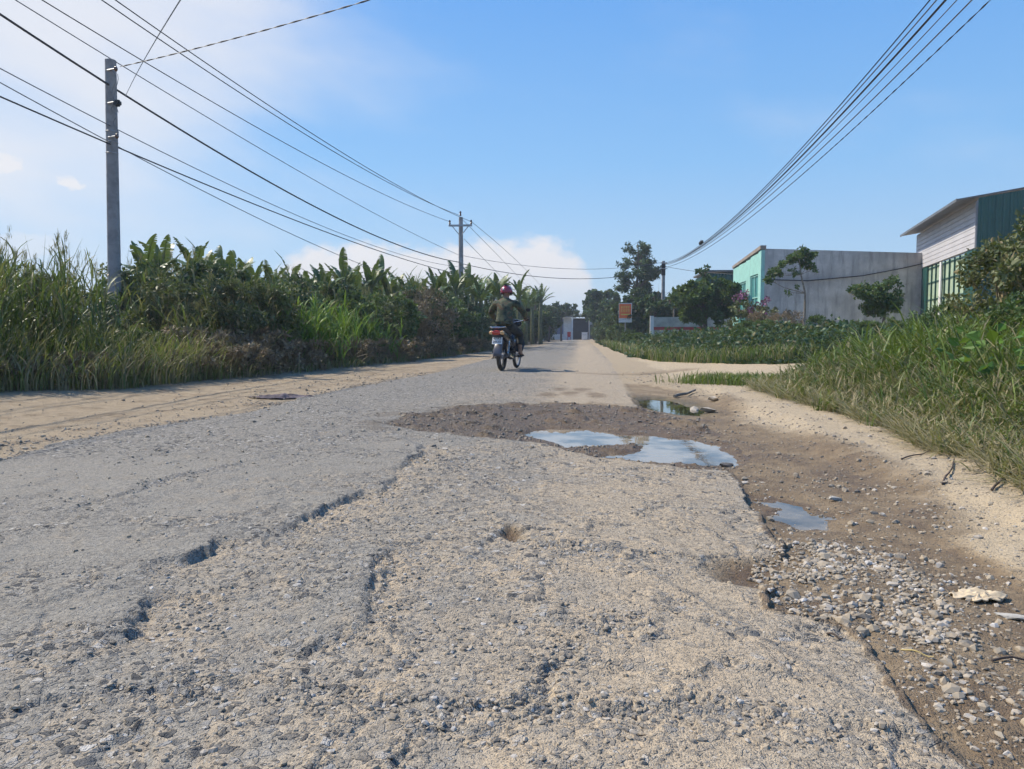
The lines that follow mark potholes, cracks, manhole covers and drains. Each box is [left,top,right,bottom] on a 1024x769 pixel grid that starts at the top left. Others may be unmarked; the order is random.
pothole [623,383,724,423]
pothole [494,522,532,543]
pothole [382,402,749,474]
